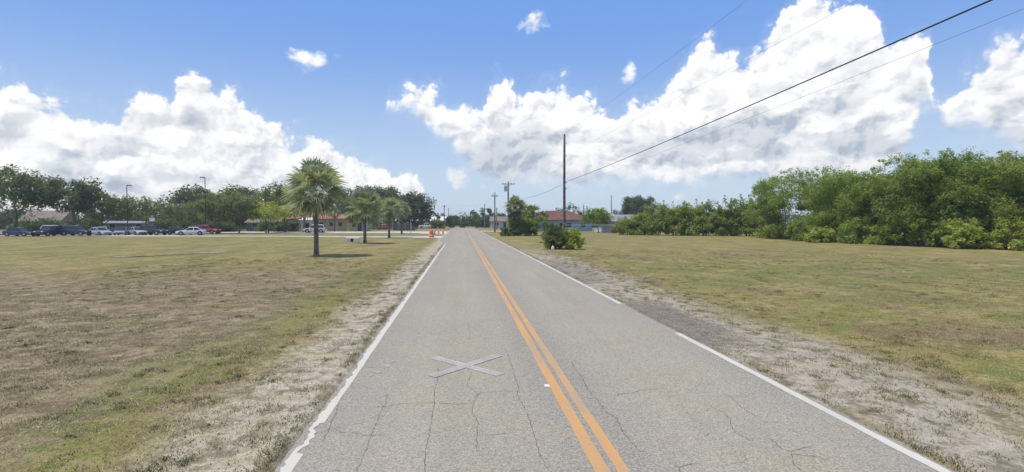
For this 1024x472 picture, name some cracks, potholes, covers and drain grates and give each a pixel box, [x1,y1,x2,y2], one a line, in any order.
crack [710,394,824,471]
crack [477,349,548,468]
crack [315,369,496,471]
crack [572,363,642,452]
